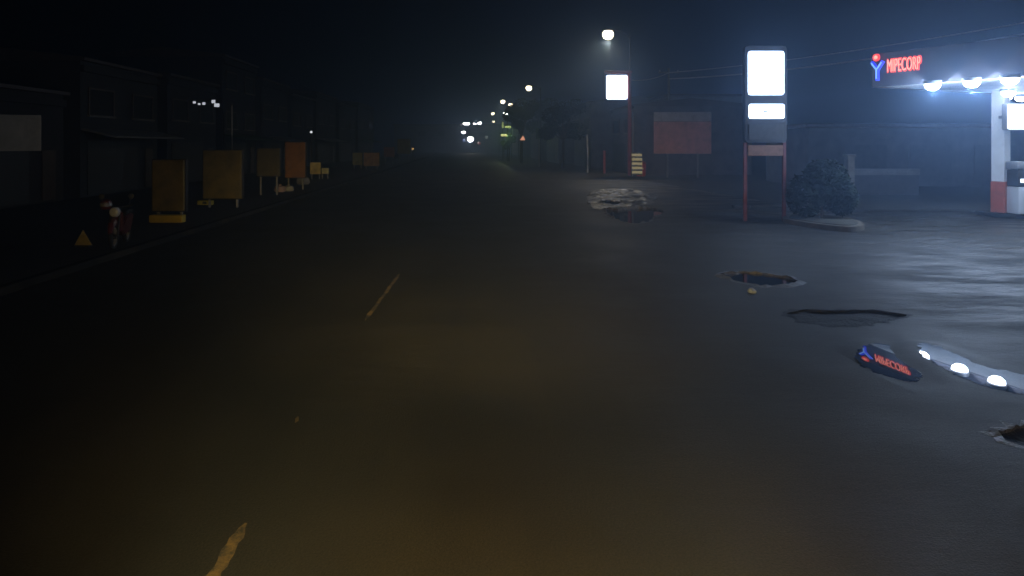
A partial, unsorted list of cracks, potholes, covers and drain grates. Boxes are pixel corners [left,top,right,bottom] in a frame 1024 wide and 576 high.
pothole [604,205,668,224]
pothole [714,271,806,288]
pothole [977,420,1024,449]
pothole [780,308,912,328]
